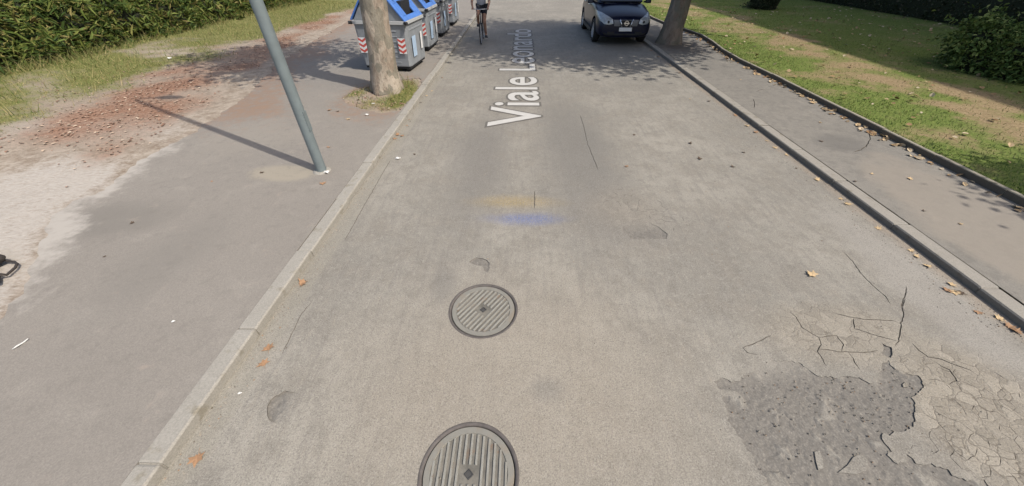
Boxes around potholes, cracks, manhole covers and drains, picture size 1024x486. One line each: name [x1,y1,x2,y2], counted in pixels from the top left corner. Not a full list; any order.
pothole [470,258,489,272]
crack [794,258,1022,486]
manhole cover [417,422,519,486]
manhole cover [448,284,518,339]
